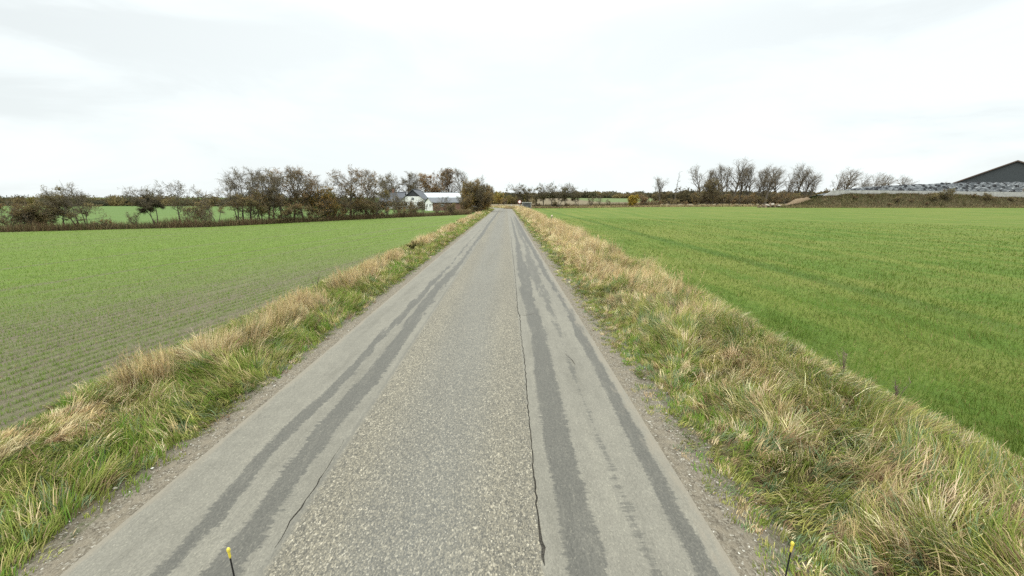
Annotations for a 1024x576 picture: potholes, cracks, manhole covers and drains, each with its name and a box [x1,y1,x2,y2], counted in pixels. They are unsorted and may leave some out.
crack [511,242,546,566]
crack [276,440,344,546]
